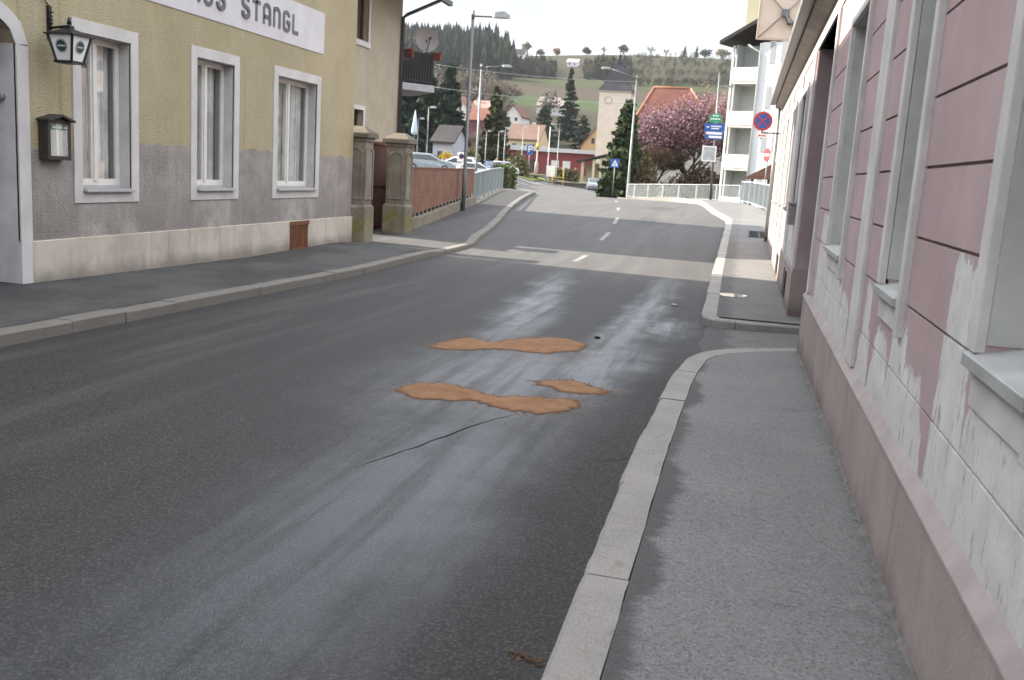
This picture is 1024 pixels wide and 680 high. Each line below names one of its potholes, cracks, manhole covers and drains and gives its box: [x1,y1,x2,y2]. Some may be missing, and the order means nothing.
crack [355,414,514,468]
